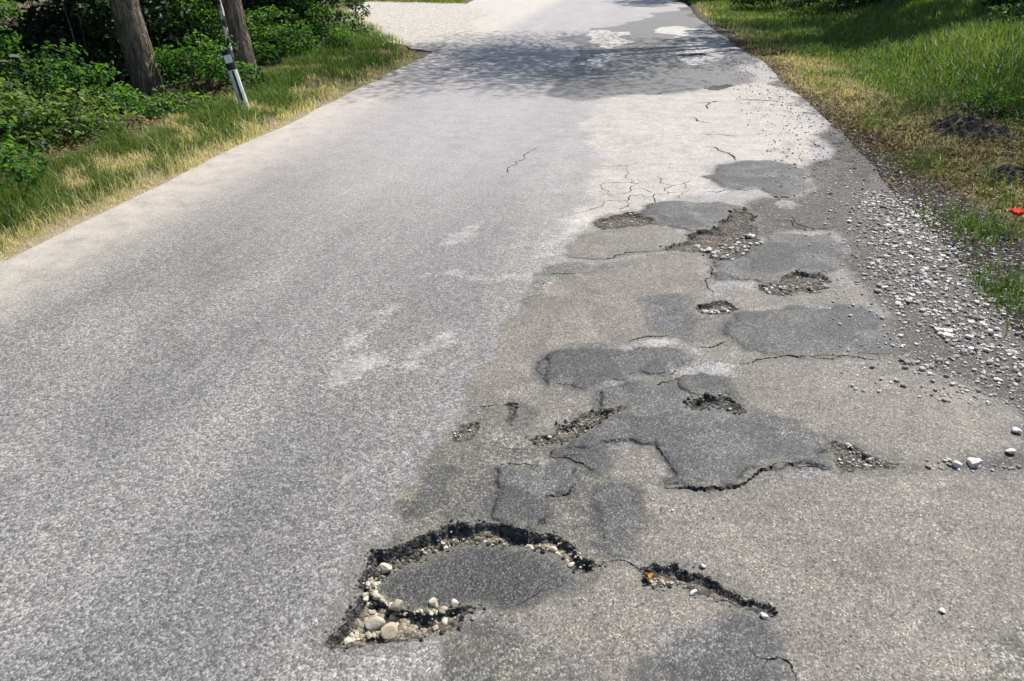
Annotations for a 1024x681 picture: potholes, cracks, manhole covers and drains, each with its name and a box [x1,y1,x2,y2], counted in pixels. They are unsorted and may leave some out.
pothole [695,300,738,315]
pothole [830,438,900,473]
pothole [758,271,830,296]
pothole [532,405,622,445]
pothole [664,210,758,261]
pothole [322,521,606,651]
pothole [592,212,655,230]
pothole [451,421,480,443]
pothole [689,394,746,414]
crack [695,101,736,160]
pothole [638,563,778,618]
crack [590,165,689,210]
